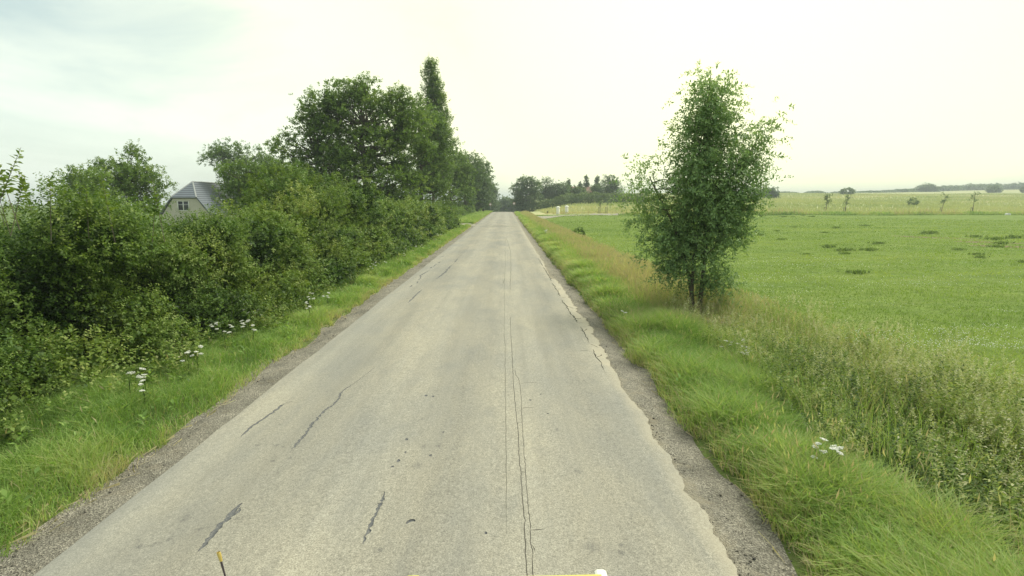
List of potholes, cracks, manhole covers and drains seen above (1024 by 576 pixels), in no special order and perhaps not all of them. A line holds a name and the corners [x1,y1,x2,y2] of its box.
crack [510,321,542,576]
crack [540,261,605,372]
